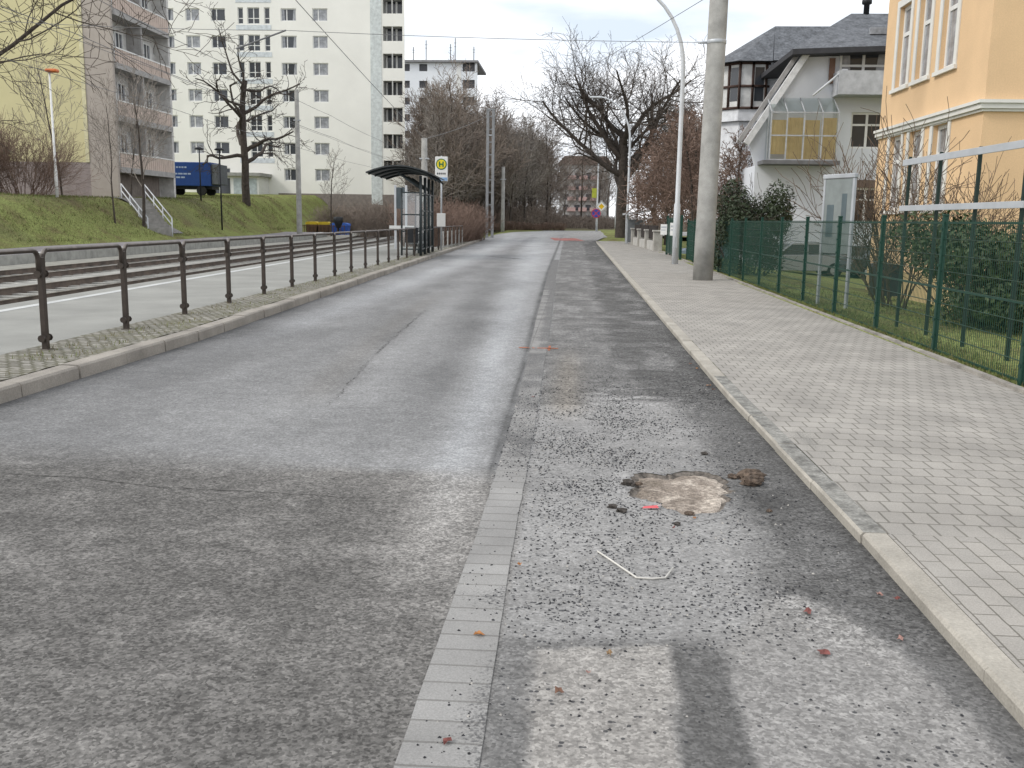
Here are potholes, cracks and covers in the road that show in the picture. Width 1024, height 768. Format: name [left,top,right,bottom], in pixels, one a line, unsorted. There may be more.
crack [8,473,372,499]
pothole [613,467,748,522]
